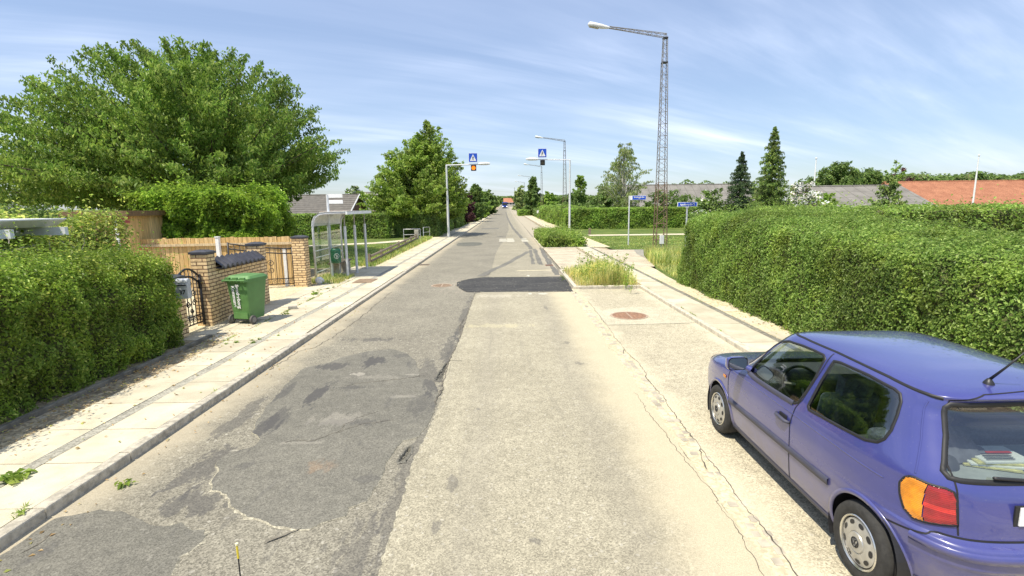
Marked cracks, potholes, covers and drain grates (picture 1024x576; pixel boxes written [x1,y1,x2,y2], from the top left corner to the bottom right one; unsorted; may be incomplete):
manhole cover [610,312,648,320]
pothole [396,445,414,464]
crack [591,305,798,576]
